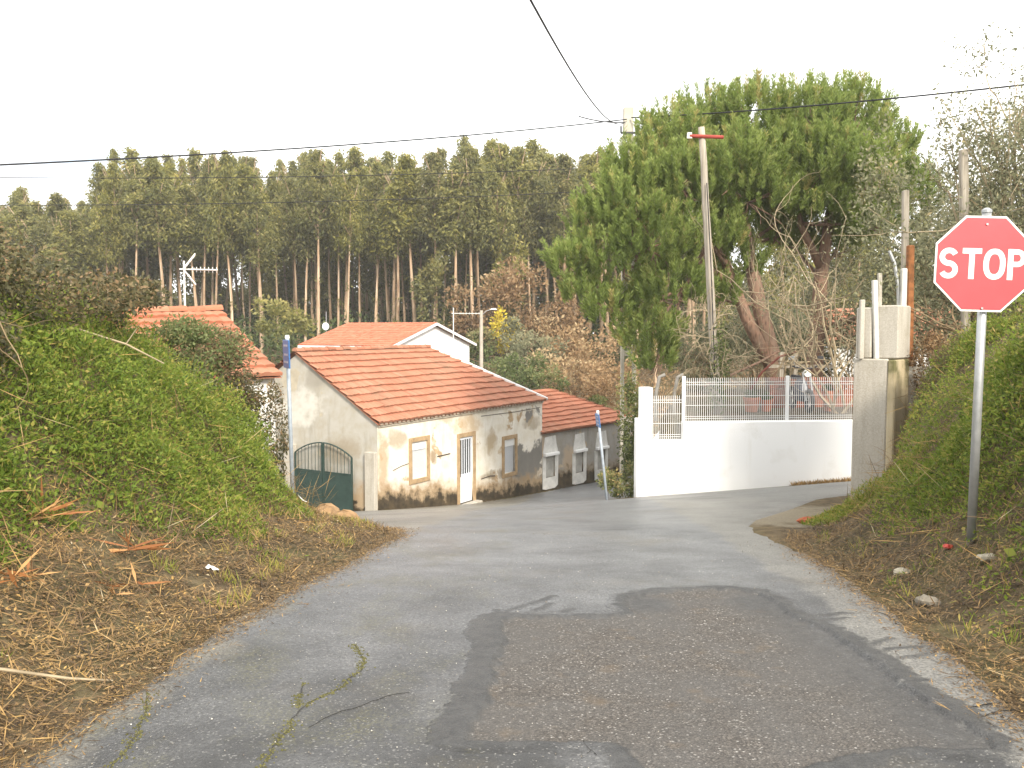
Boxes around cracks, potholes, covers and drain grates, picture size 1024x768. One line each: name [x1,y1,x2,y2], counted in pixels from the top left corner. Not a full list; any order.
crack [254,643,410,768]
crack [103,690,159,768]
